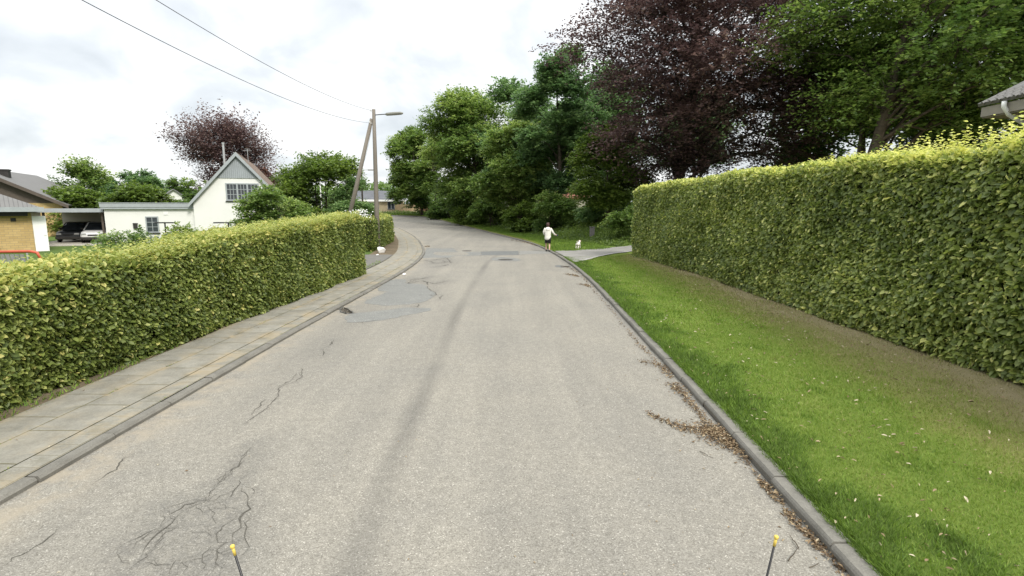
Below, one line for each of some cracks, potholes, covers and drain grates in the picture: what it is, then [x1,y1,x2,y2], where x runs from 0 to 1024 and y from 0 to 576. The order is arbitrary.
crack [241,341,333,457]
crack [116,450,255,576]
